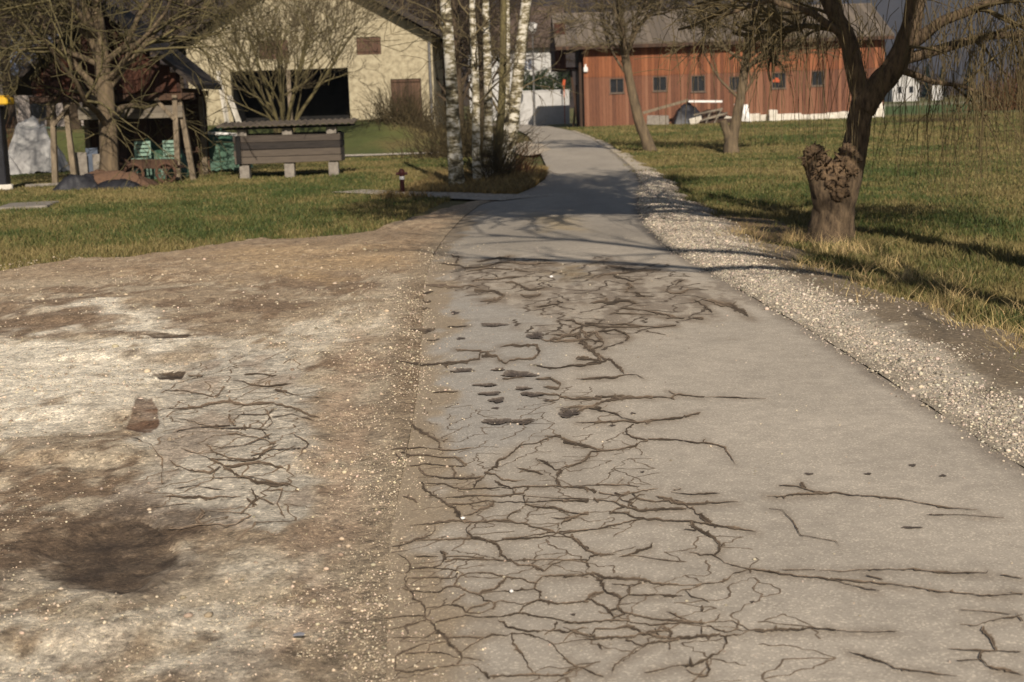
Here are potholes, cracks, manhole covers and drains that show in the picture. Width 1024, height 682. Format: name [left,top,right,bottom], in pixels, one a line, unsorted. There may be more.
crack [123,373,324,530]
pothole [558,407,581,418]
crack [384,254,1024,679]
pothole [123,393,165,440]
